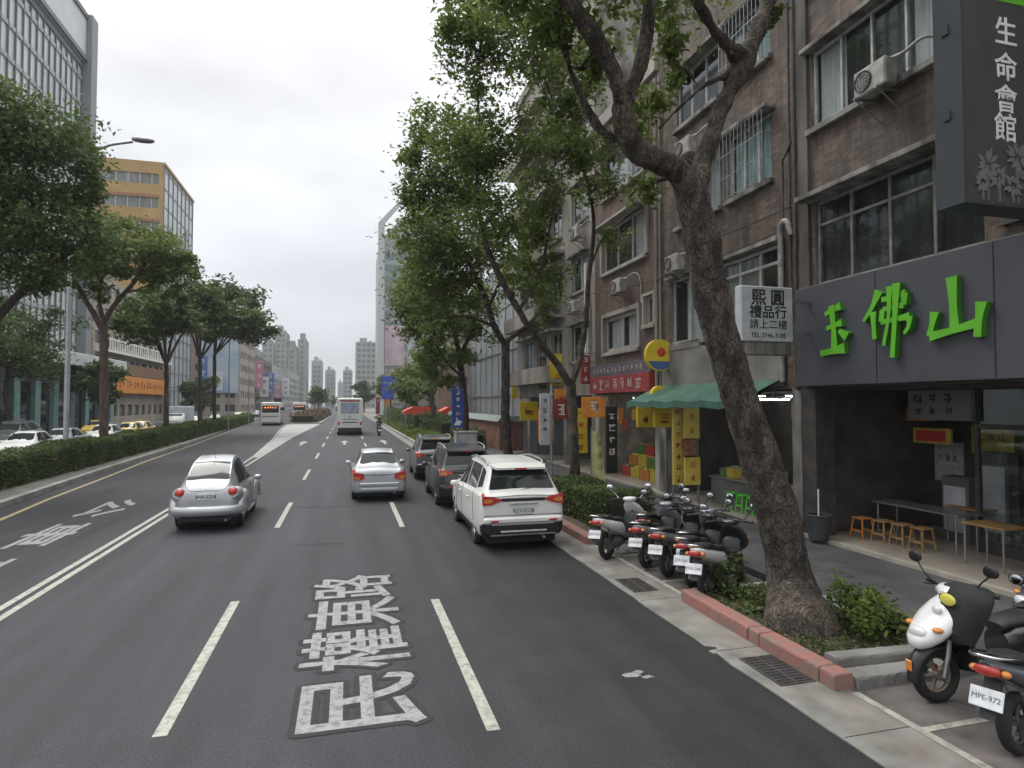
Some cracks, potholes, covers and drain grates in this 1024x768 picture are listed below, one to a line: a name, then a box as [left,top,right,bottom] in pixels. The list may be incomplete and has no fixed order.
drain grate [739,654,816,686]
drain grate [615,577,658,592]
